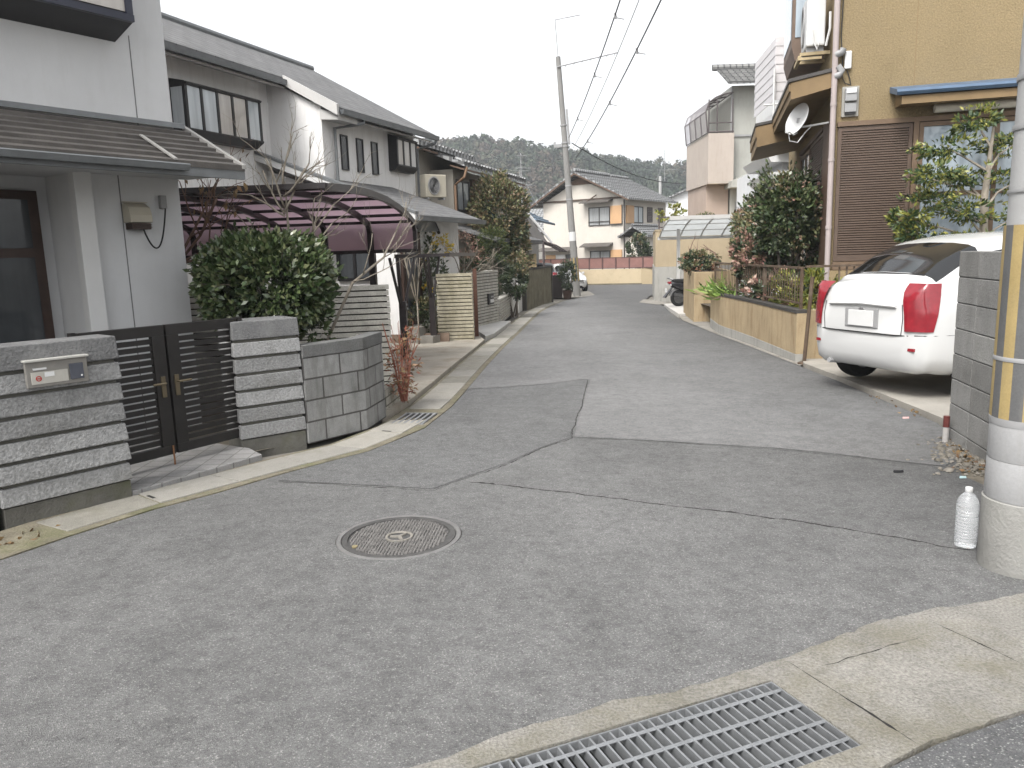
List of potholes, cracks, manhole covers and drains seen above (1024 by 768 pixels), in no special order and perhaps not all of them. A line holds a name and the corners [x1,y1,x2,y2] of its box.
manhole cover [336,515,461,560]
drain grate [392,413,438,425]
crack [819,638,917,667]
drain grate [514,681,860,768]
